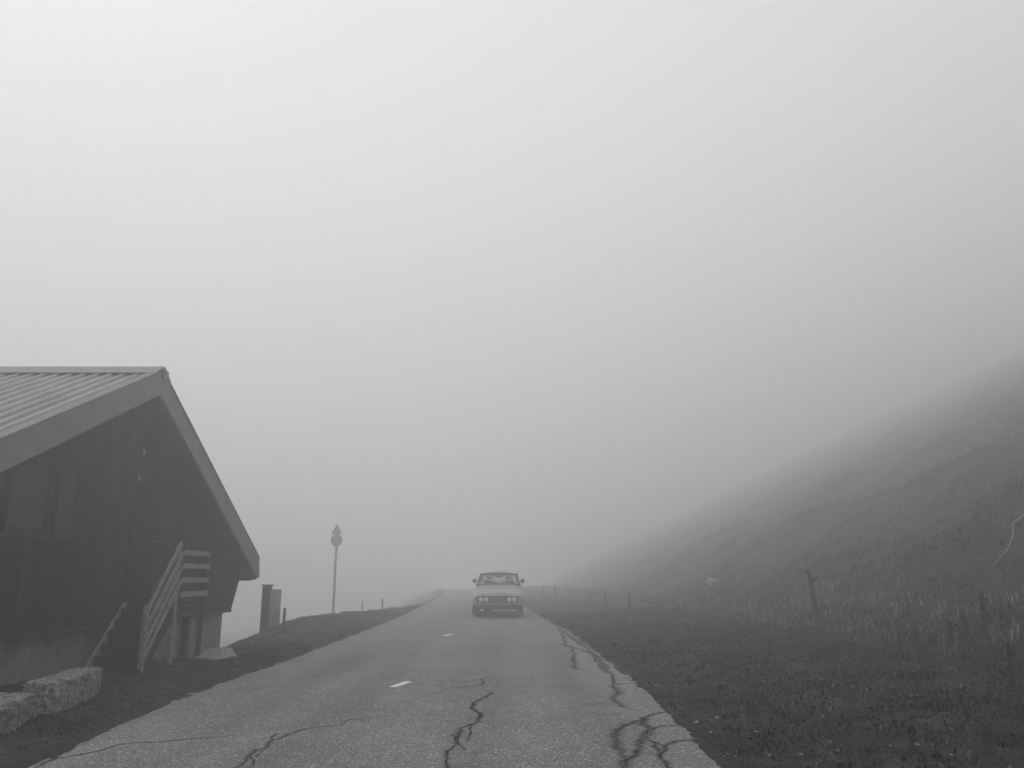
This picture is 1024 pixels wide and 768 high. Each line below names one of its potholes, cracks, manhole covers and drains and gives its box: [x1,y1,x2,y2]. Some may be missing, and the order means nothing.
crack [36,736,224,768]
crack [444,678,493,768]
crack [235,718,365,768]
crack [550,622,693,768]
